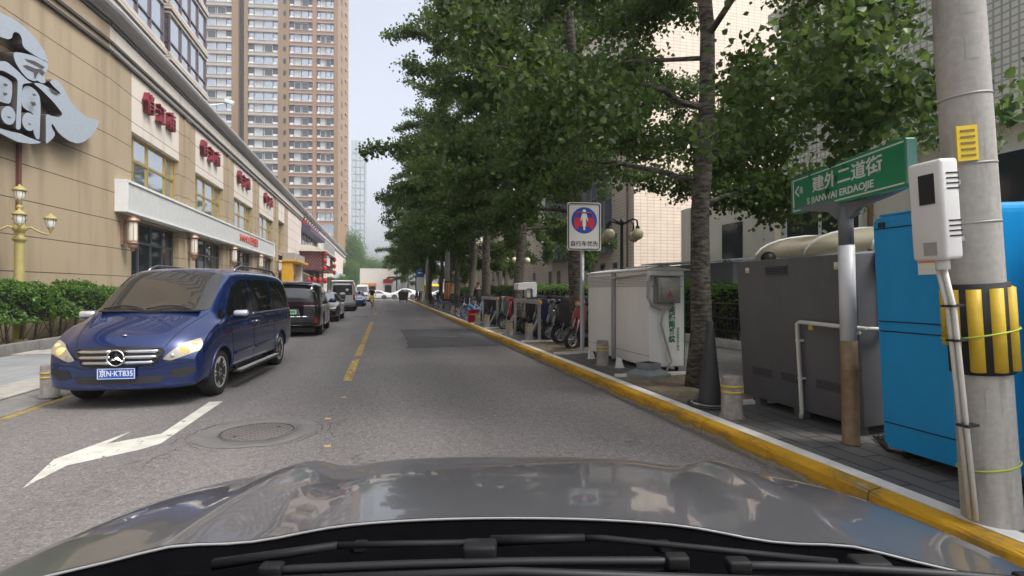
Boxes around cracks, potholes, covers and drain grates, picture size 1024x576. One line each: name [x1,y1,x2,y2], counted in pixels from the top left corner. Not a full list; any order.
manhole cover [189,418,316,448]
